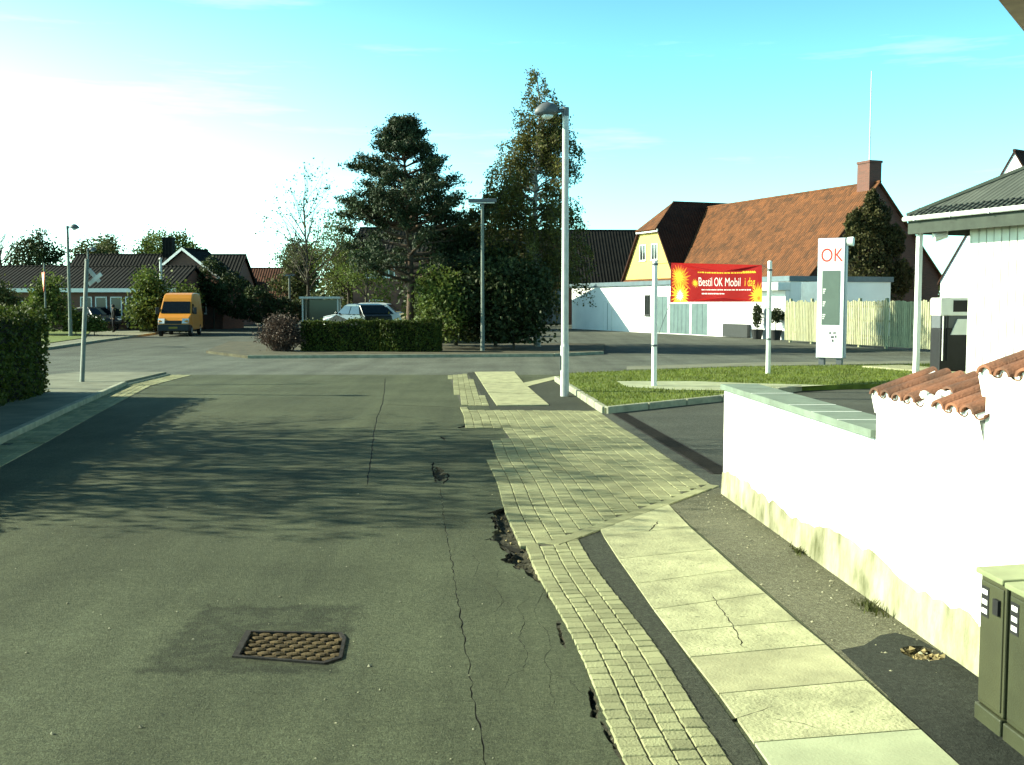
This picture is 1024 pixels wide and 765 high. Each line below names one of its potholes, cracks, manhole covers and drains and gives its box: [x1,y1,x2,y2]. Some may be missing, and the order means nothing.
pothole [587,686,599,719]
pothole [556,621,566,649]
pothole [434,466,447,481]
crack [367,379,454,485]
crack [473,508,587,705]
pothole [491,508,541,583]
